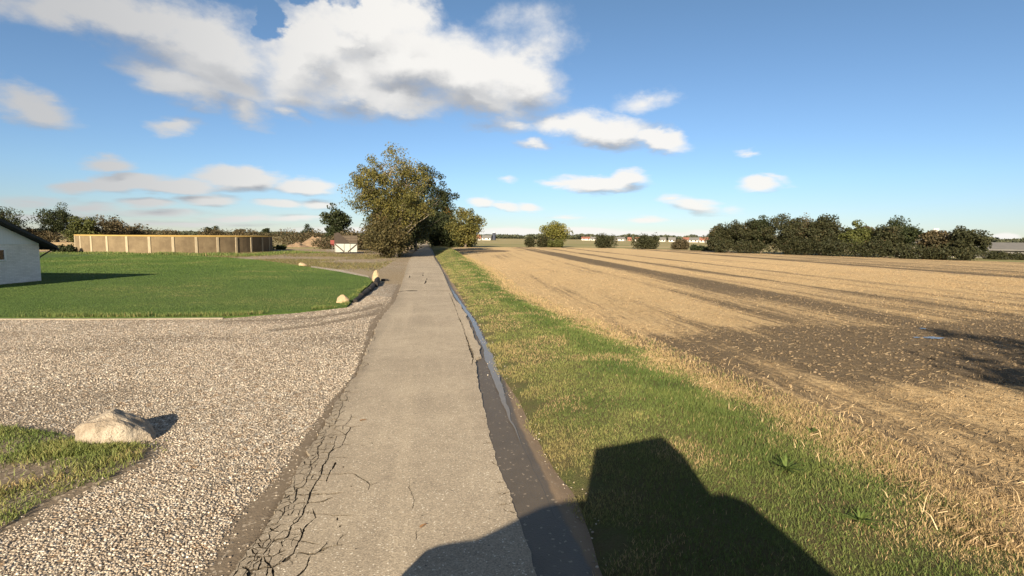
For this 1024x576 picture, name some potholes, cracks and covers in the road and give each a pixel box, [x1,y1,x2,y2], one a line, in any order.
crack [234,336,375,576]
crack [449,293,474,363]
